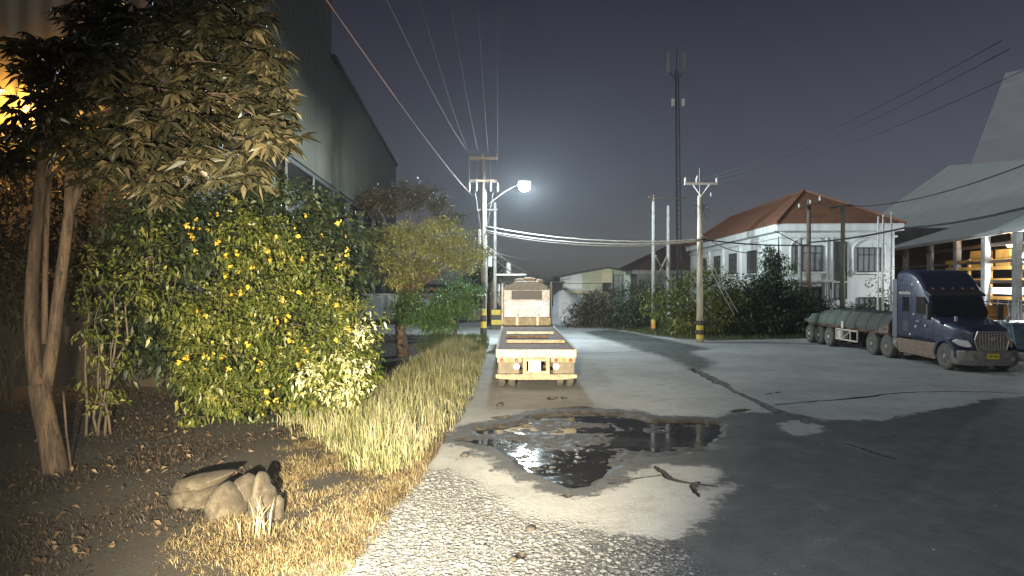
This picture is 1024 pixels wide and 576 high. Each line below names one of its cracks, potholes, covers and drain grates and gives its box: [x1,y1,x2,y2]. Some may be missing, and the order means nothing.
crack [844,443,896,459]
pothole [450,410,729,490]
crack [691,369,1021,424]
